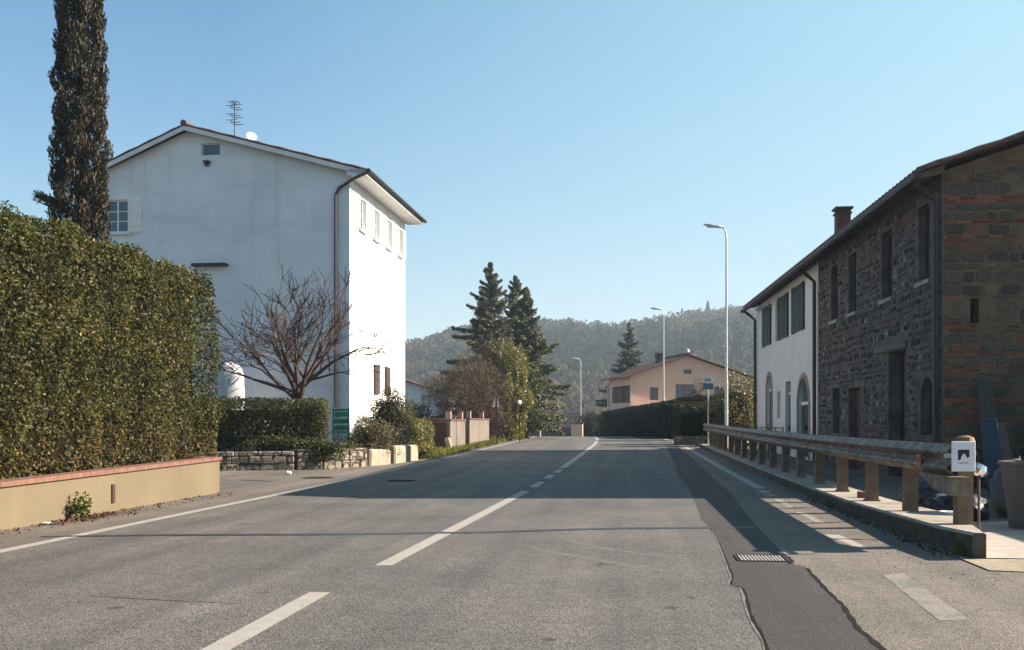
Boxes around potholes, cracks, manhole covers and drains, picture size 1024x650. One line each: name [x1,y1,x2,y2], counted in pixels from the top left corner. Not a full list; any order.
drain grate [733,554,791,562]
